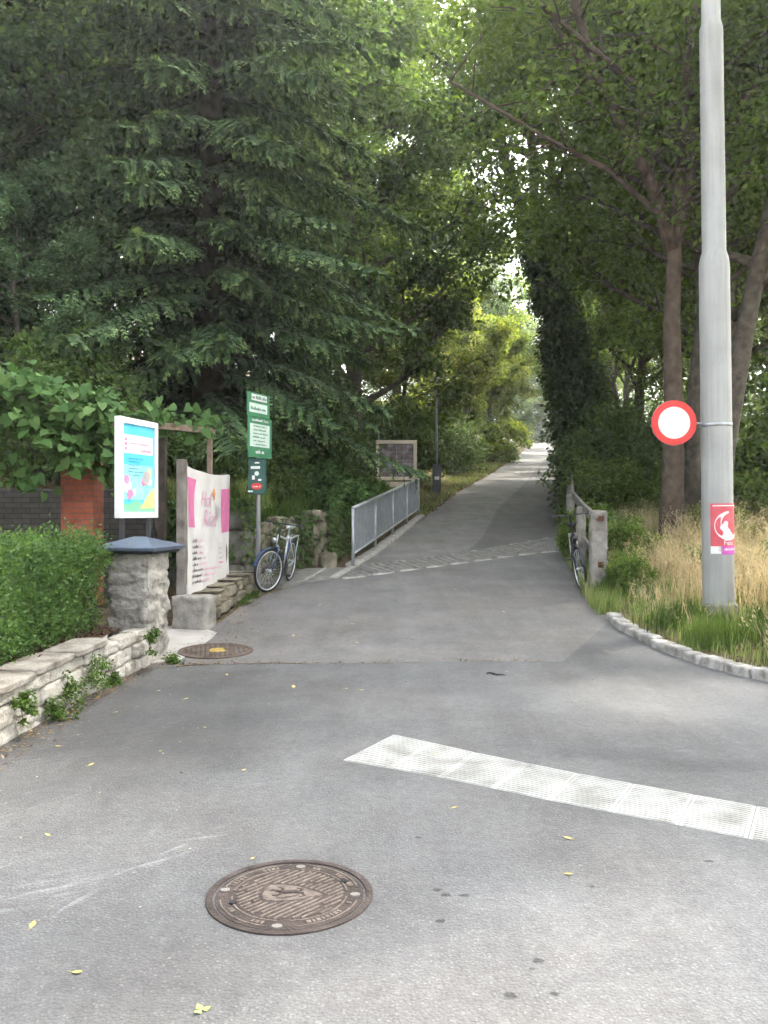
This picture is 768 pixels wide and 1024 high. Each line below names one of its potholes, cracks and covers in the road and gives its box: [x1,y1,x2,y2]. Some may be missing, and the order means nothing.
manhole cover [205,859,373,936]
manhole cover [178,643,253,659]
